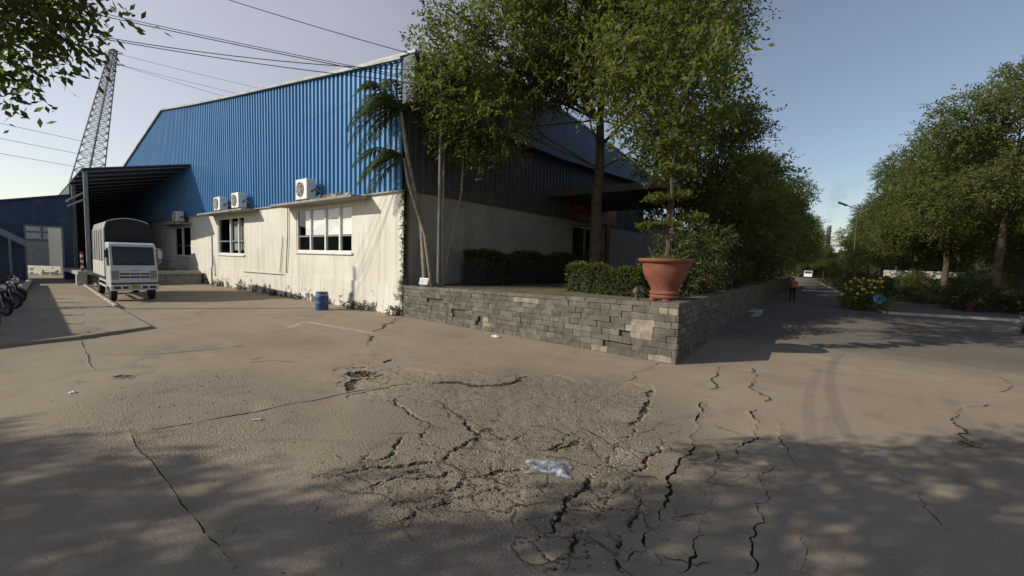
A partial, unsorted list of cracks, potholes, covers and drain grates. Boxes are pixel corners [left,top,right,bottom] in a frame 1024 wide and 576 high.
crack [881,462,952,530]
crack [938,374,1015,445]
crack [311,367,817,576]
pothole [340,370,382,379]
crack [345,318,400,391]
crack [624,363,659,382]
